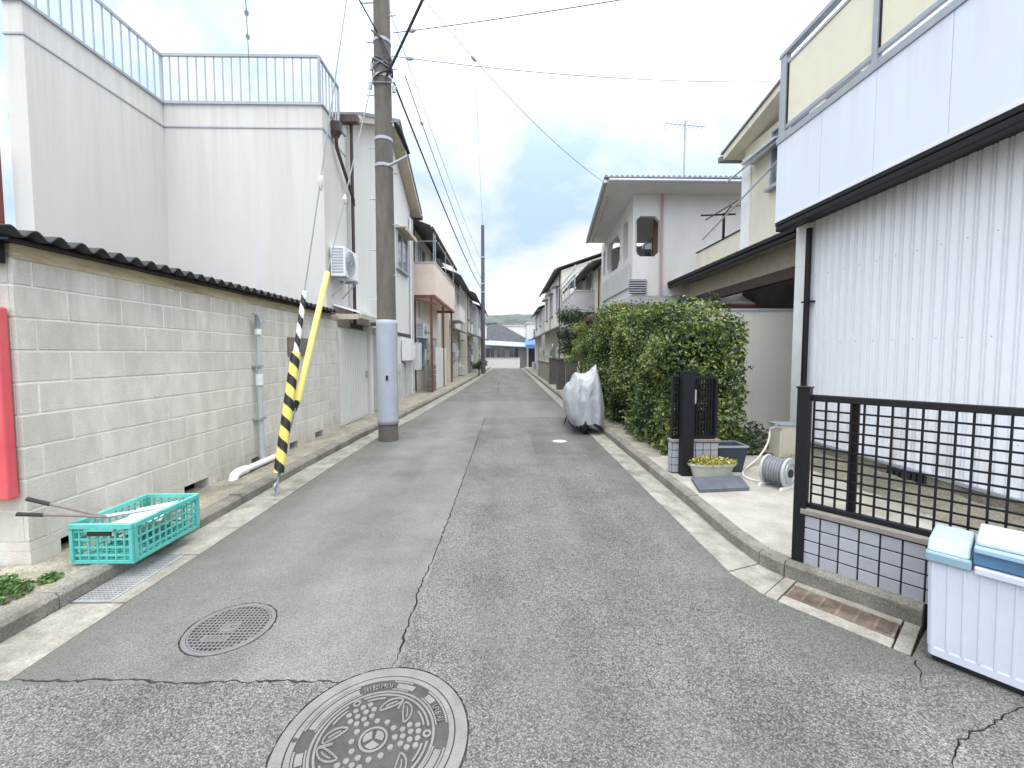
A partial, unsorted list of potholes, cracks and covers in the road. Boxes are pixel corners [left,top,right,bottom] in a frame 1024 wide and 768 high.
manhole cover [178,603,278,658]
drain grate [72,555,184,604]
drain grate [785,585,900,644]
crack [392,420,485,666]
crack [951,707,1024,768]
manhole cover [265,667,470,768]
